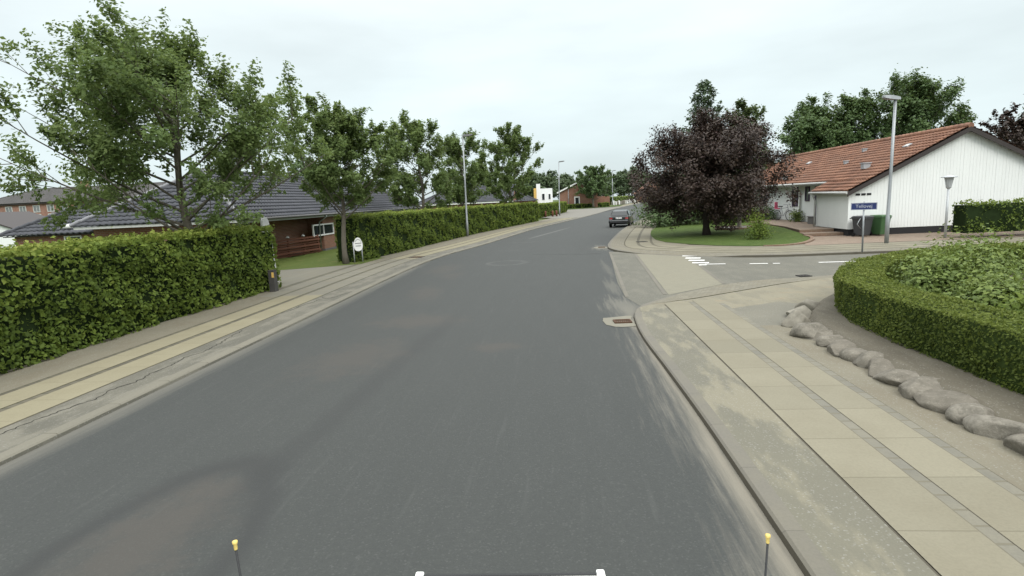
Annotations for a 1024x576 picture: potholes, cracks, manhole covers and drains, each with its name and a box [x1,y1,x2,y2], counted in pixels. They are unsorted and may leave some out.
drain grate [603,316,636,327]
